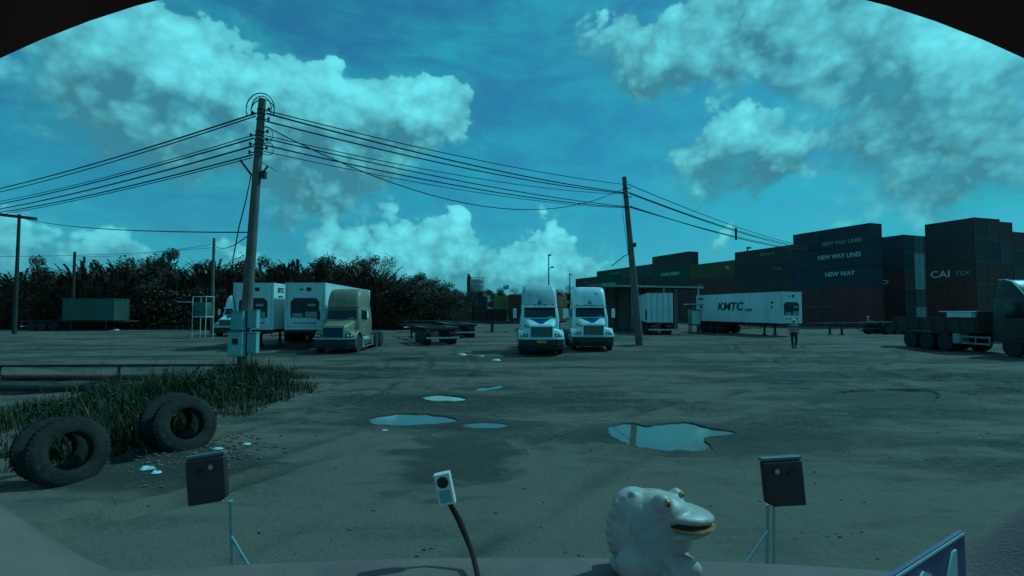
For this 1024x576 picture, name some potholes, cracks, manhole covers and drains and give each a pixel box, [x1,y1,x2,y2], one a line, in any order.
pothole [354,411,471,429]
pothole [592,419,751,457]
pothole [466,384,512,393]
pothole [412,393,477,404]
pothole [449,419,522,432]
pothole [820,388,955,409]
